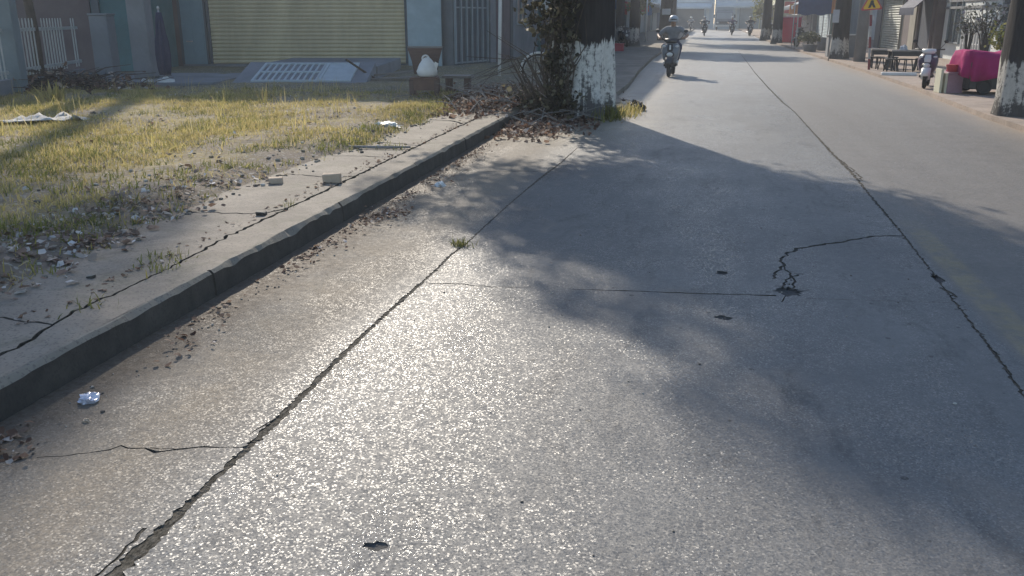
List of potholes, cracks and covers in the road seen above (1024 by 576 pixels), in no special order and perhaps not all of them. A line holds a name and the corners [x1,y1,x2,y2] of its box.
crack [37,445,242,458]
pothole [362,541,388,551]
